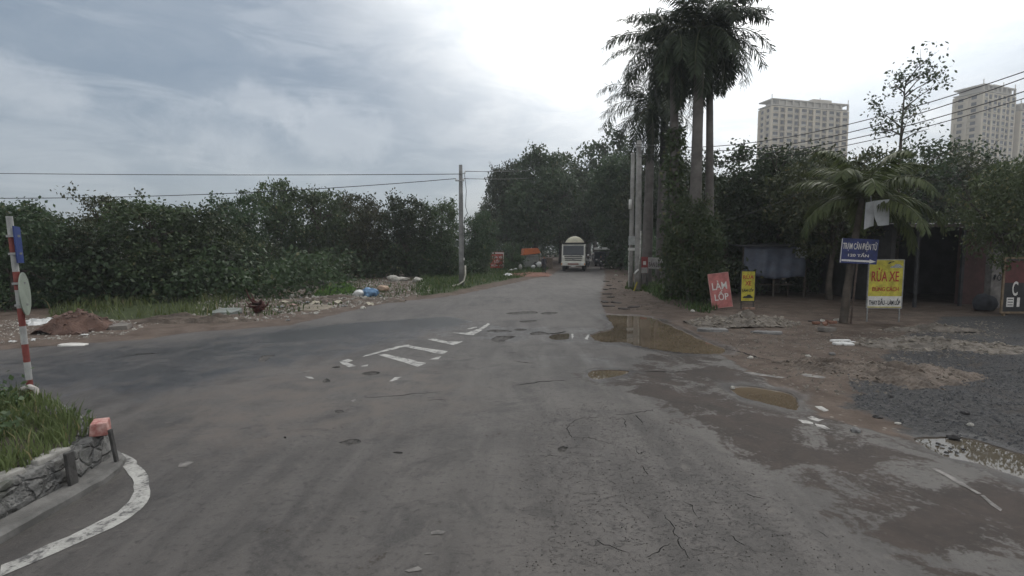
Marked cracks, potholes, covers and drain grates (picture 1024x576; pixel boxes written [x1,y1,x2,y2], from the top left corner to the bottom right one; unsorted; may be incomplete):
pothole [590,314,726,354]
crack [648,502,697,557]
pothole [729,386,800,410]
pothole [913,436,1024,479]
pothole [588,370,630,379]
